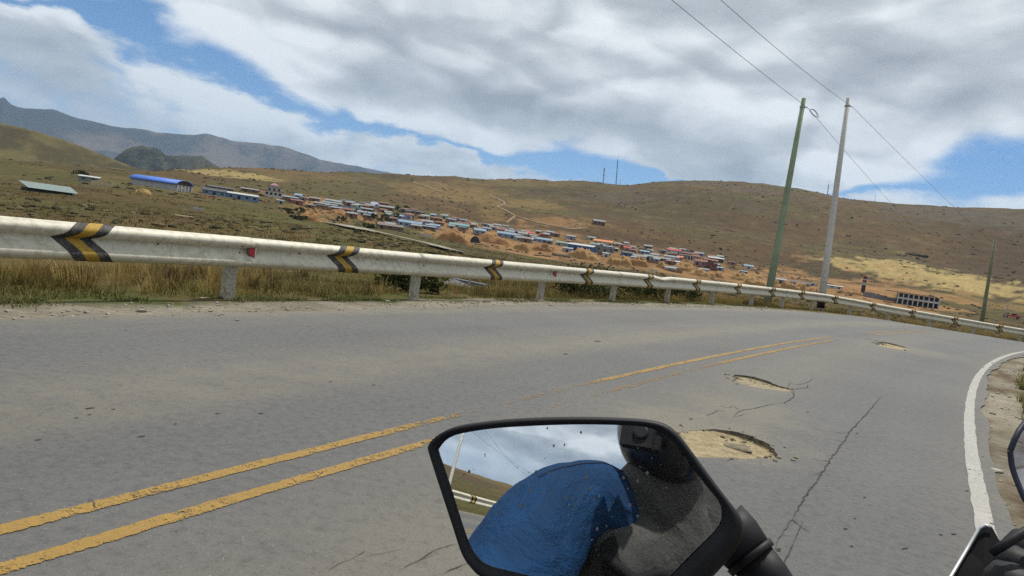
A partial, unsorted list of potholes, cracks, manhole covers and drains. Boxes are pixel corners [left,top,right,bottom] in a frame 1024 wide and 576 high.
pothole [679,429,777,459]
crack [328,543,467,574]
pothole [732,375,792,392]
crack [775,403,875,563]
pothole [875,342,910,350]
crack [708,379,812,416]
